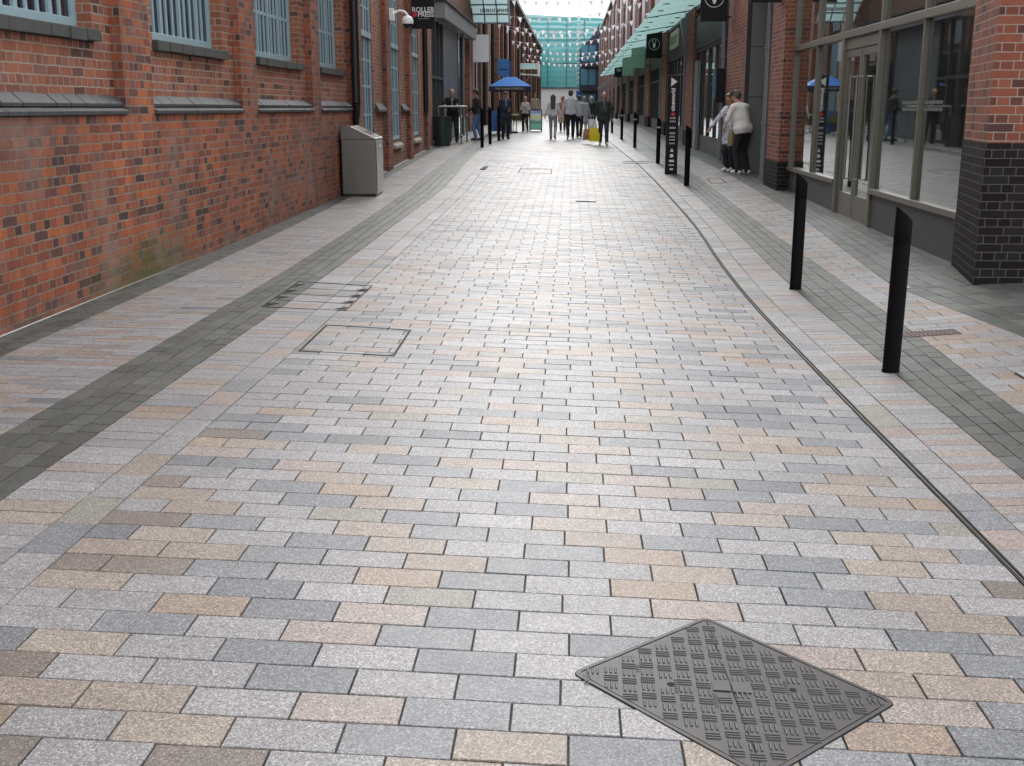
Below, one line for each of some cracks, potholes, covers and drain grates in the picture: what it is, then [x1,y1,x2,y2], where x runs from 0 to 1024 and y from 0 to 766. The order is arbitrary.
manhole cover [261,281,372,311]
manhole cover [575,618,893,766]
manhole cover [298,324,411,356]
drain grate [903,329,962,337]
